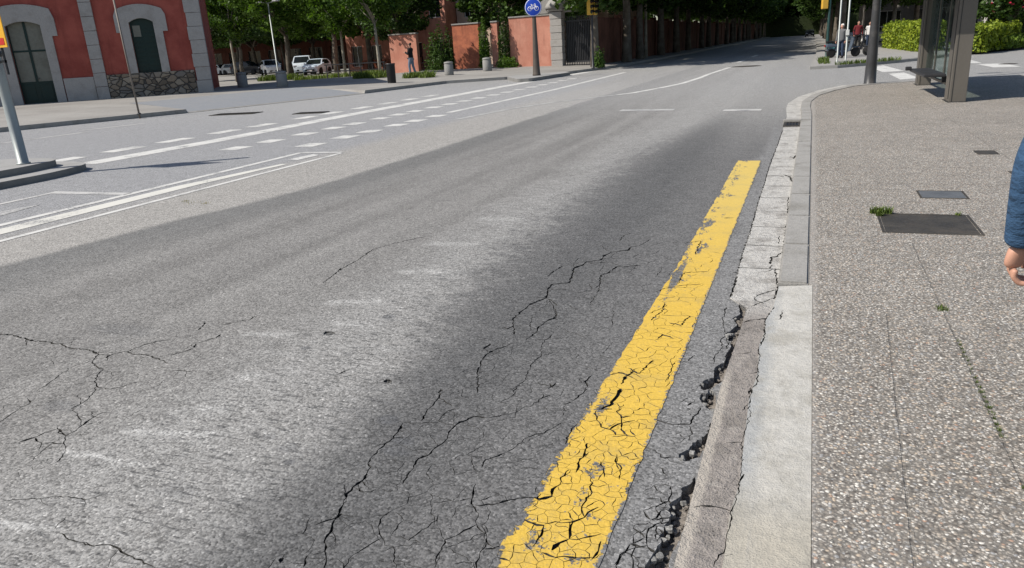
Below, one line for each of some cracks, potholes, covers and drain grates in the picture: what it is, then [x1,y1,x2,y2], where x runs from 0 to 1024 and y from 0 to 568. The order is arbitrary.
manhole cover [877,213,986,236]
pothole [645,477,696,568]
pothole [699,304,746,396]
crack [270,233,783,568]
manhole cover [916,190,970,199]
crack [0,316,255,473]
pothole [678,389,717,461]
crack [8,494,155,568]
